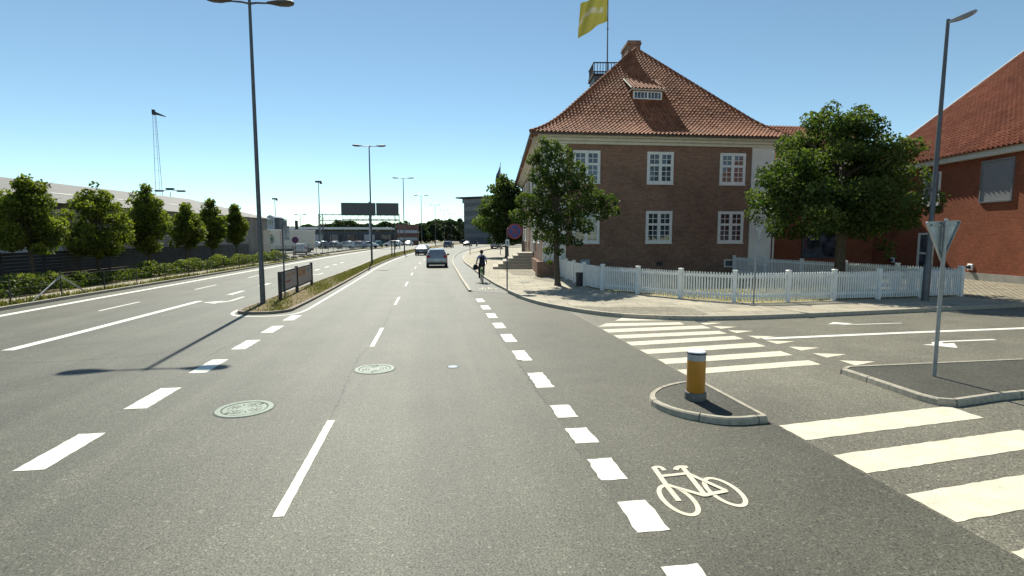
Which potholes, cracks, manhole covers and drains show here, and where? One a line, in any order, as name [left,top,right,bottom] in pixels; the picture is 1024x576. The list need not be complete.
manhole cover [353,364,396,374]
manhole cover [213,400,276,418]
